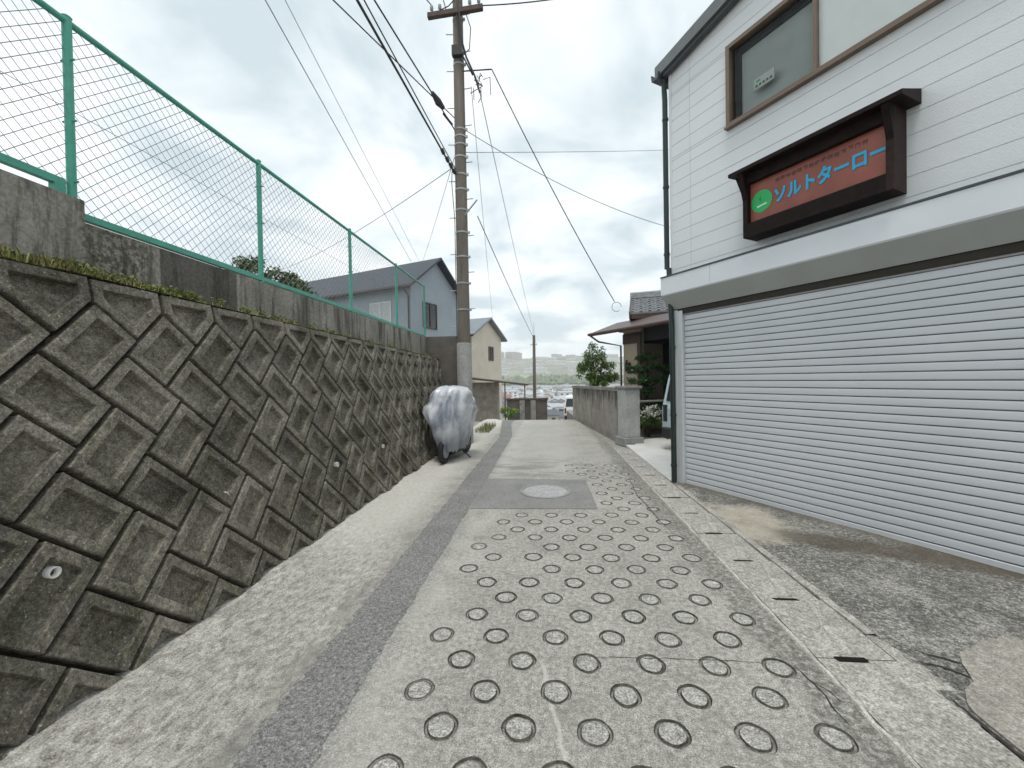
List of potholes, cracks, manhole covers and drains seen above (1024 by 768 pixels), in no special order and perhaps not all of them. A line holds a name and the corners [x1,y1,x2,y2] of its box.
manhole cover [520,484,571,499]
crack [577,656,849,724]
crack [899,649,971,678]
